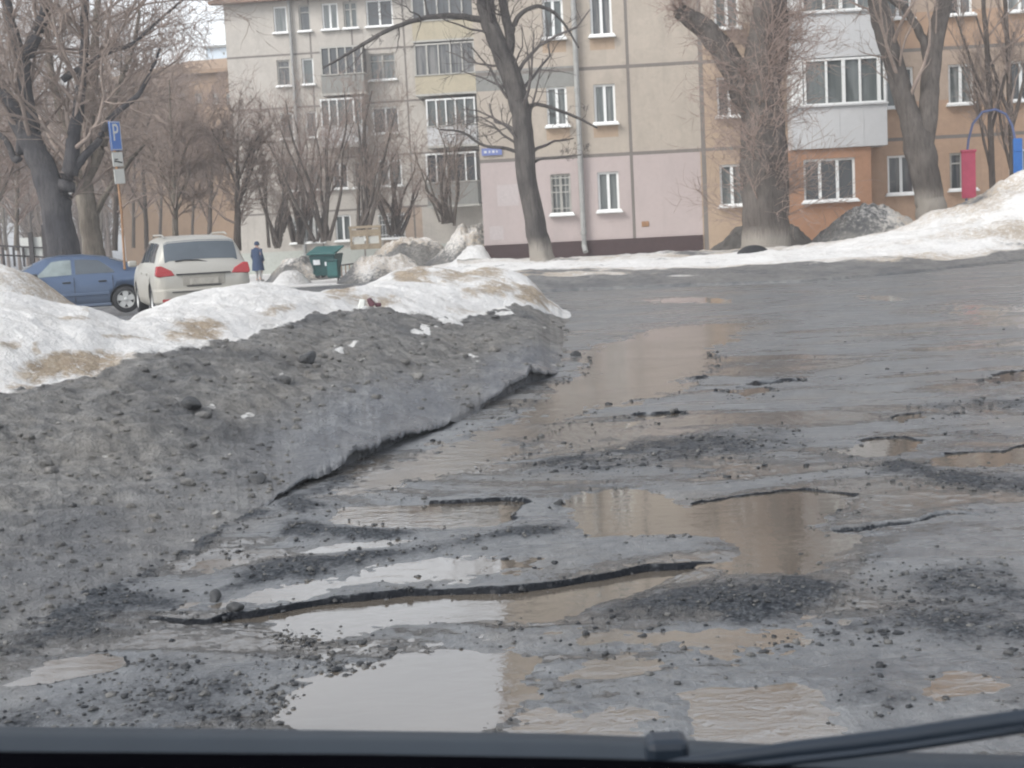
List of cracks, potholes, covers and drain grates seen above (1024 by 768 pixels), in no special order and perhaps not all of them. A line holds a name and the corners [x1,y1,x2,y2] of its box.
pothole [545,484,895,577]
pothole [136,562,714,650]
pothole [912,445,1024,469]
pothole [822,436,940,458]
pothole [0,647,138,690]
pothole [297,496,532,531]
pothole [245,642,561,732]
